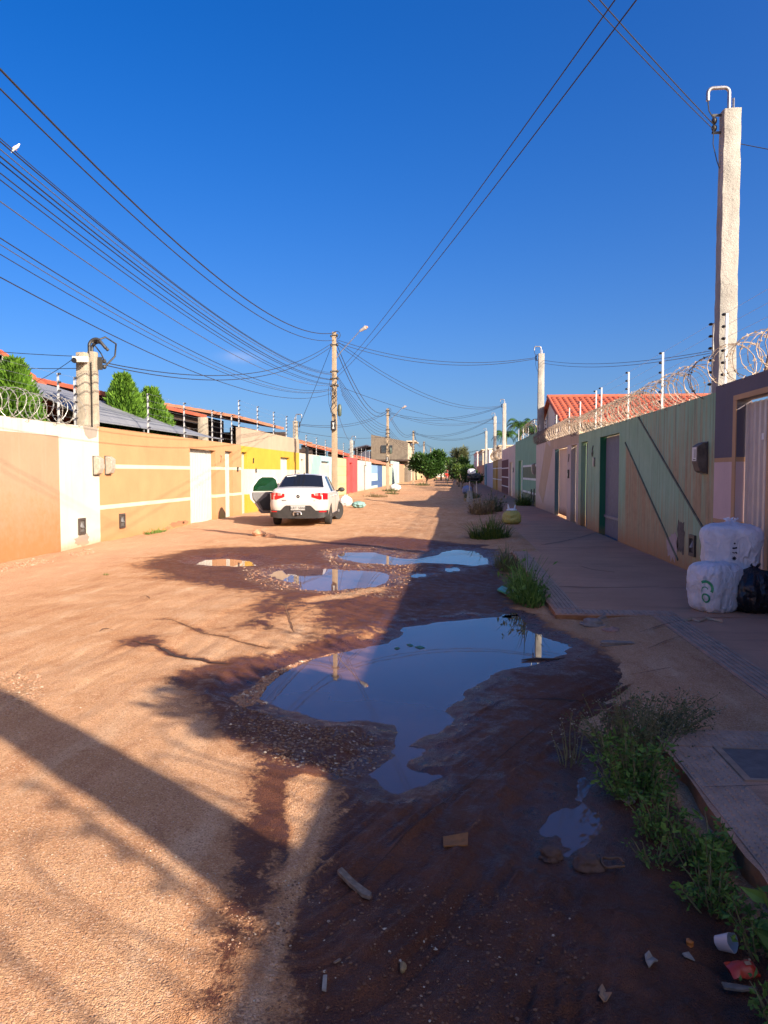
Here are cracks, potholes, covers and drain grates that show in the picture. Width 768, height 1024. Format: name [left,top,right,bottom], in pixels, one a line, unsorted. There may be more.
pothole [229,613,591,803]
pothole [261,566,398,590]
pothole [513,767,627,871]
pothole [190,557,262,566]
pothole [330,549,495,566]
manhole cover [713,746,768,782]
